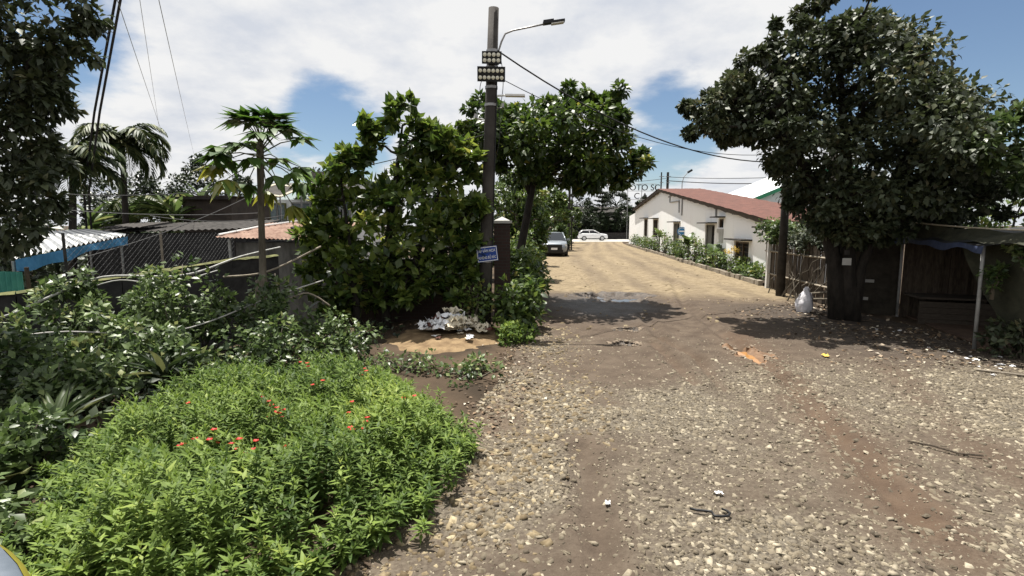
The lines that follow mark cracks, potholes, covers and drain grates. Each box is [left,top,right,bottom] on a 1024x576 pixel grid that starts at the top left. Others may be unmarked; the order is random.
pothole [565,291,661,304]
